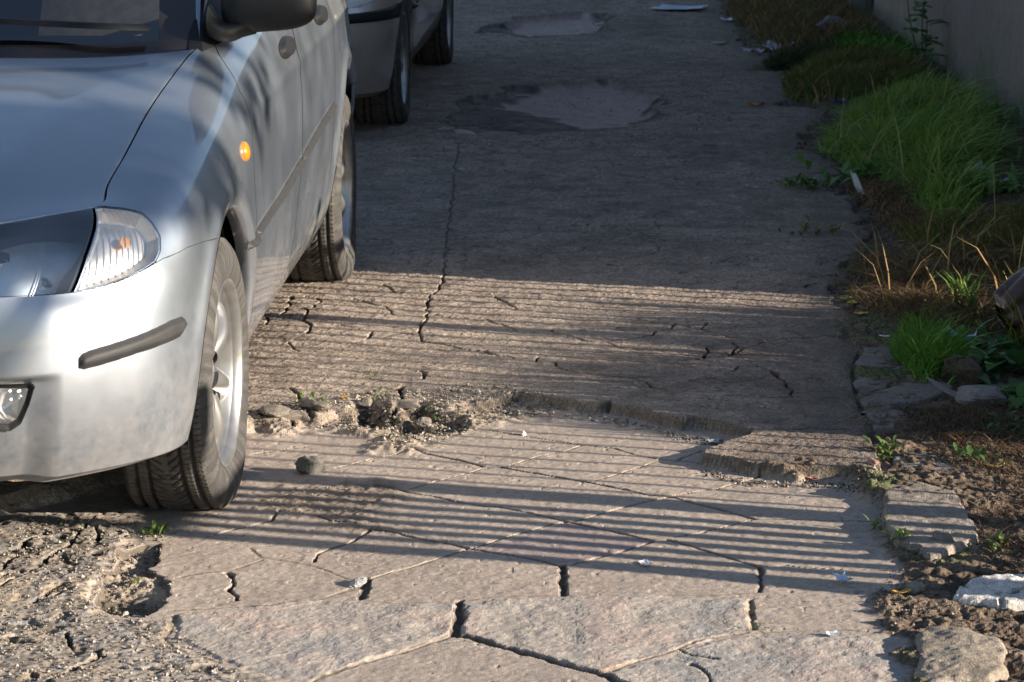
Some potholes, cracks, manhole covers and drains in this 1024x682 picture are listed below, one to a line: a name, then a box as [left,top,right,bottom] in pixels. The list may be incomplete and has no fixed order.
pothole [445,78,673,135]
crack [354,285,402,315]
pothole [348,405,472,437]
crack [417,142,517,359]
crack [0,521,144,682]
crack [553,319,841,399]
crack [223,571,241,601]
pothole [93,543,172,617]
crack [678,649,721,682]
pothole [475,11,617,38]
crack [261,296,374,352]
